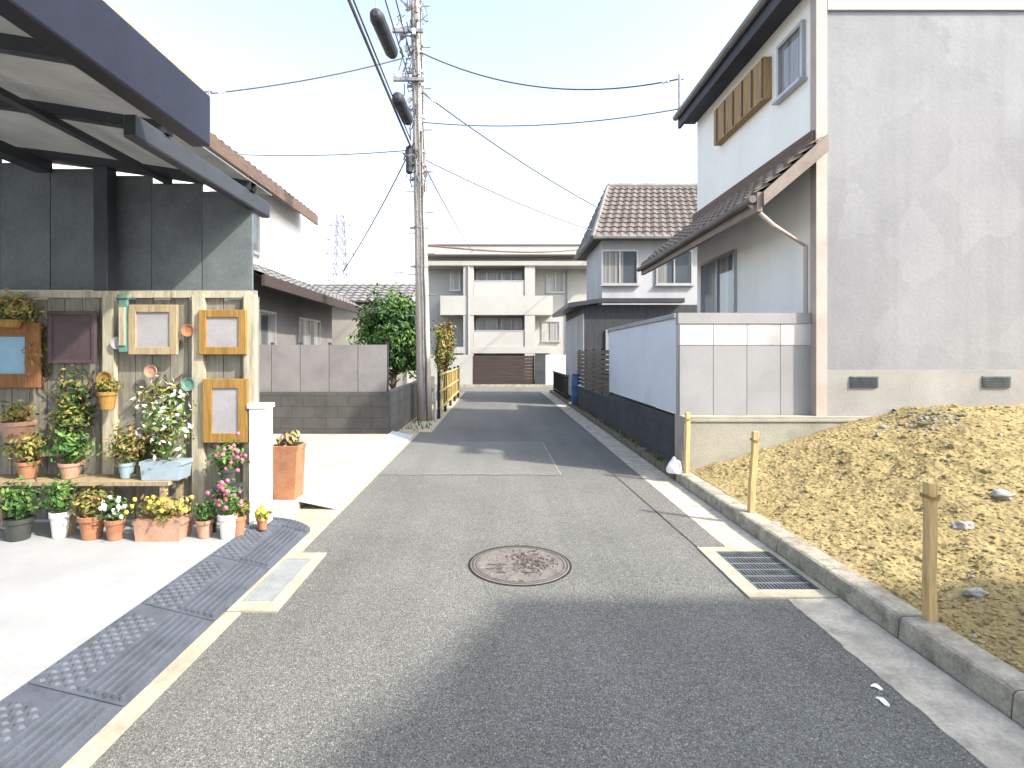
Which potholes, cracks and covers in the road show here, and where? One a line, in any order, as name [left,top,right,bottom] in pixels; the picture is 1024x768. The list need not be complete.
manhole cover [468,545,572,586]
